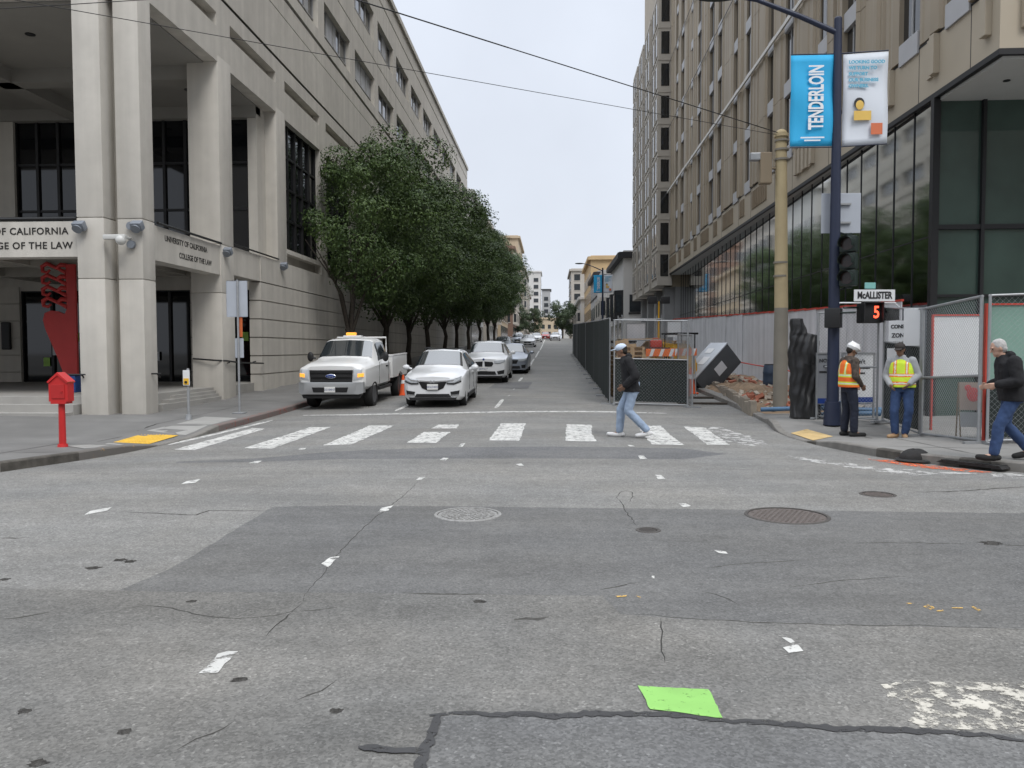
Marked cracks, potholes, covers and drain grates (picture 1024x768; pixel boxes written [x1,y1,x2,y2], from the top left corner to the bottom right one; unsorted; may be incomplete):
crack [641,591,1024,663]
crack [177,721,234,750]
manhole cover [744,507,831,525]
manhole cover [434,507,502,522]
crack [126,482,418,636]
